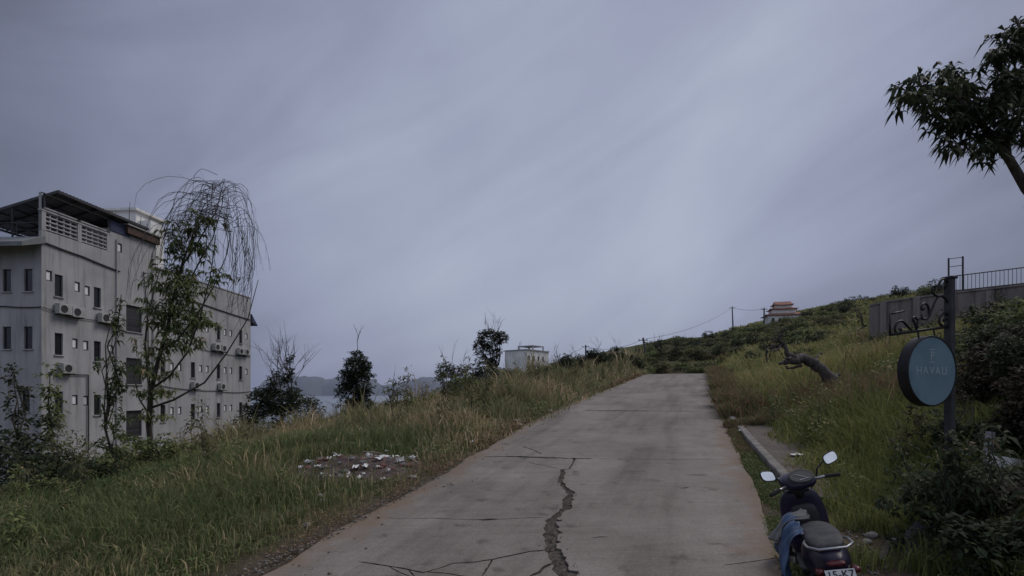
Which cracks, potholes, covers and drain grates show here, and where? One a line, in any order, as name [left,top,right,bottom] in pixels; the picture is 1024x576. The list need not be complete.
crack [362,447,599,576]
